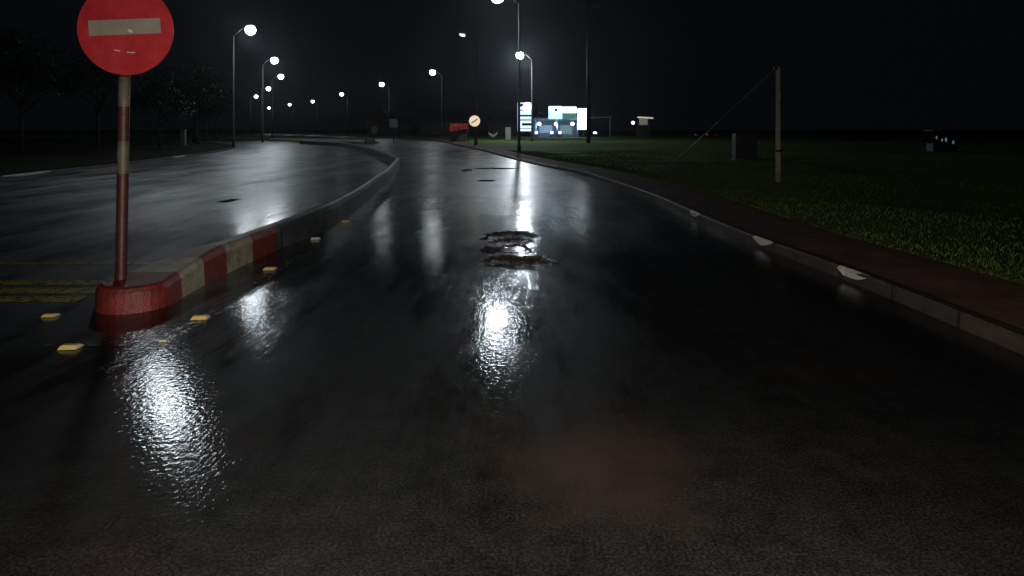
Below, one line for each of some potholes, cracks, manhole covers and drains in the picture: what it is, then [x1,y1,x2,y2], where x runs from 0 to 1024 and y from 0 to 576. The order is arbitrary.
pothole [479,246,503,254]
pothole [501,244,532,254]
pothole [478,230,539,245]
pothole [475,254,560,271]
